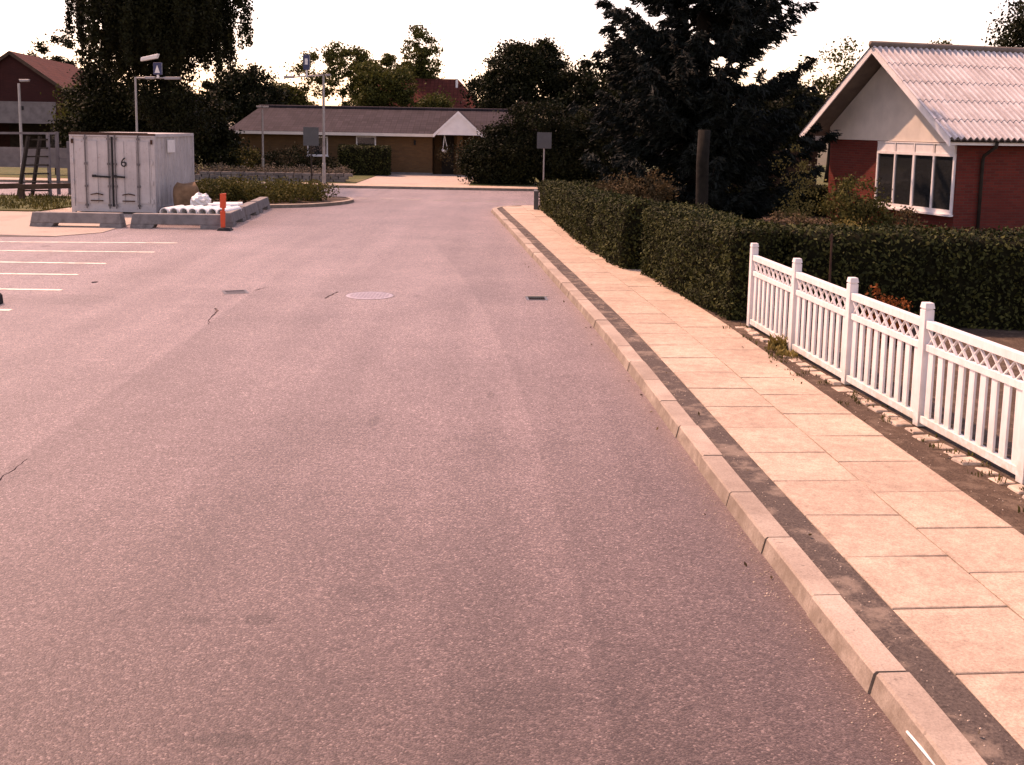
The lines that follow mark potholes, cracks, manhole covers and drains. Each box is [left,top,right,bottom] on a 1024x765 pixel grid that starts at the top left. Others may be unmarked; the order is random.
manhole cover [345,291,395,300]
